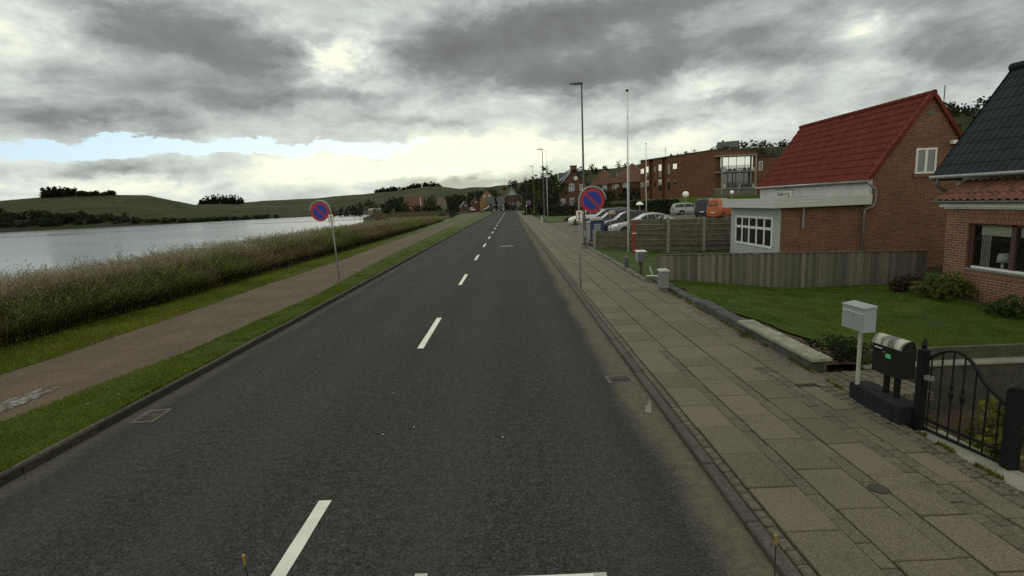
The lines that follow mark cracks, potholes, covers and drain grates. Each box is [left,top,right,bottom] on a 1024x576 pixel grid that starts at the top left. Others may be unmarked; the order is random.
utility cover [867,484,890,494]
